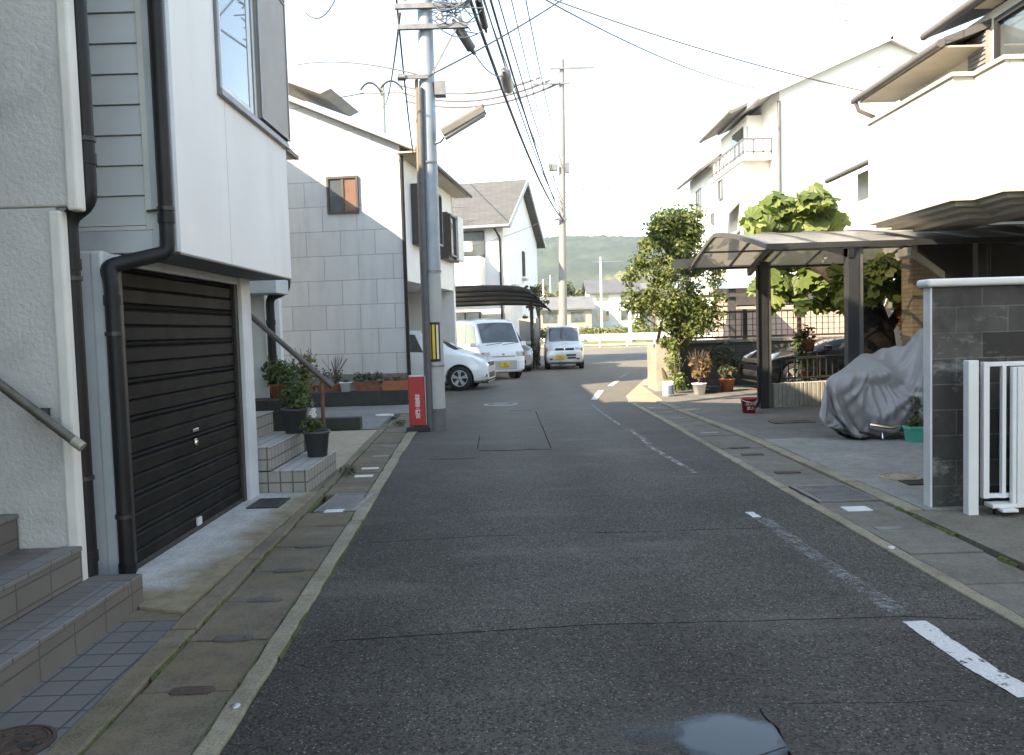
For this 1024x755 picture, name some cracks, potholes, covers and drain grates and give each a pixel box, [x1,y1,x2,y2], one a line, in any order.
drain grate [790,484,879,503]
manhole cover [878,473,923,481]
manhole cover [0,724,57,755]
drain grate [314,493,374,513]
